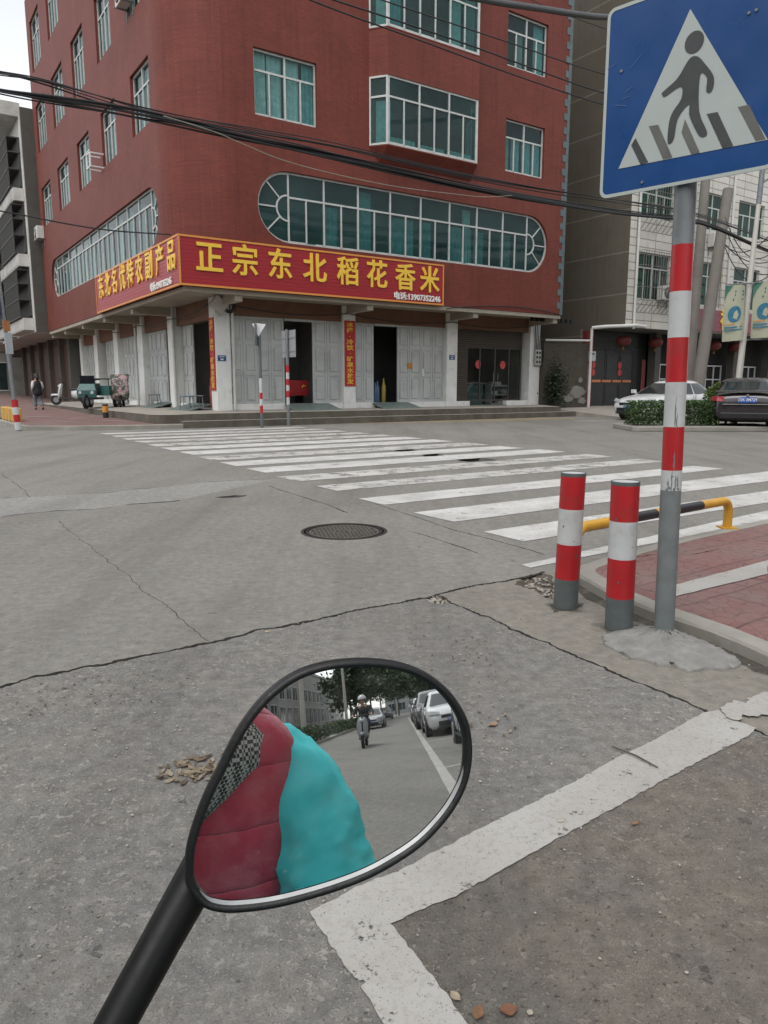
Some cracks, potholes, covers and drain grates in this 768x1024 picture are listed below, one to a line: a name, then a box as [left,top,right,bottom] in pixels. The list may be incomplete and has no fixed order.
crack [0,571,768,736]
manhole cover [301,523,387,540]
pothole [515,573,554,599]
